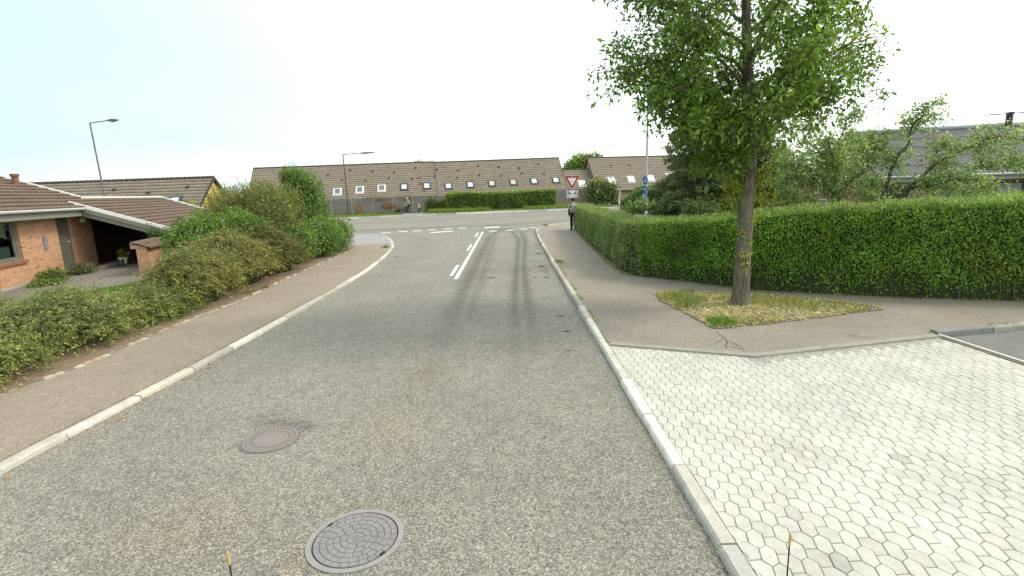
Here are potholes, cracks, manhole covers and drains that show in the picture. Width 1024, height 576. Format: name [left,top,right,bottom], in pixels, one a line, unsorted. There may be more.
manhole cover [239,427,301,454]
manhole cover [305,509,404,574]
